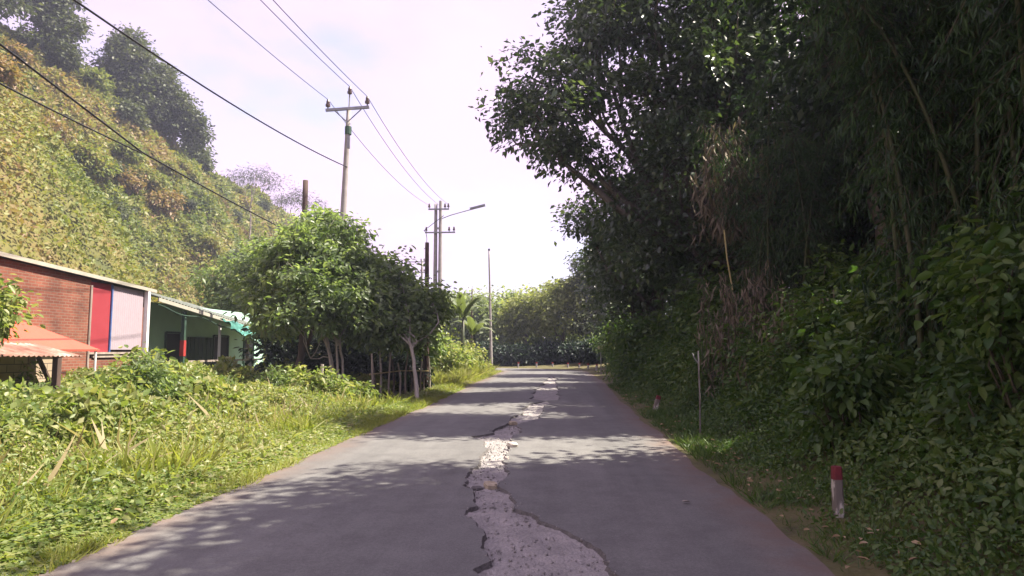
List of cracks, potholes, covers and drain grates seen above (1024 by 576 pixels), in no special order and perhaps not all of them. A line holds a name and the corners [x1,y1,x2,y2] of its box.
pothole [463,401,619,576]
pothole [529,376,561,401]
